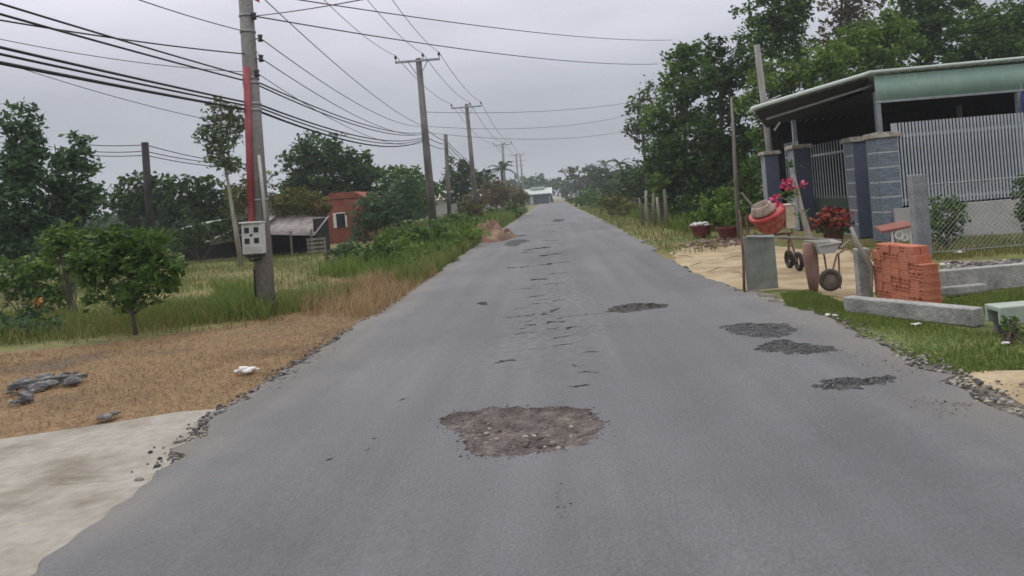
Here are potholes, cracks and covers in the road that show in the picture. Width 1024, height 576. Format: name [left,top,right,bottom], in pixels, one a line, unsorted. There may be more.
crack [506,231,601,388]
pothole [719,322,798,338]
pothole [753,339,838,355]
pothole [439,406,604,458]
pothole [812,375,897,391]
pothole [605,303,668,313]
pothole [505,239,531,247]
